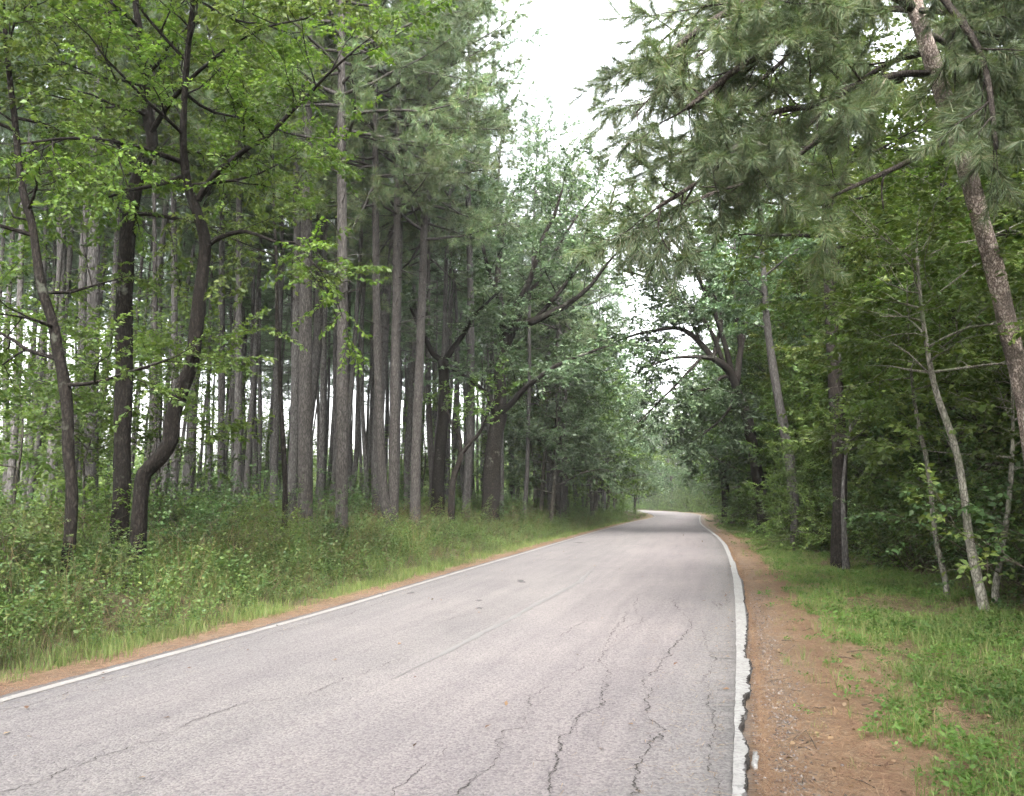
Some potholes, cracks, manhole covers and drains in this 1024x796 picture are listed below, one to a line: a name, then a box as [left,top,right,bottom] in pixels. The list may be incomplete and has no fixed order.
crack [629,598,729,796]
crack [2,659,398,792]
